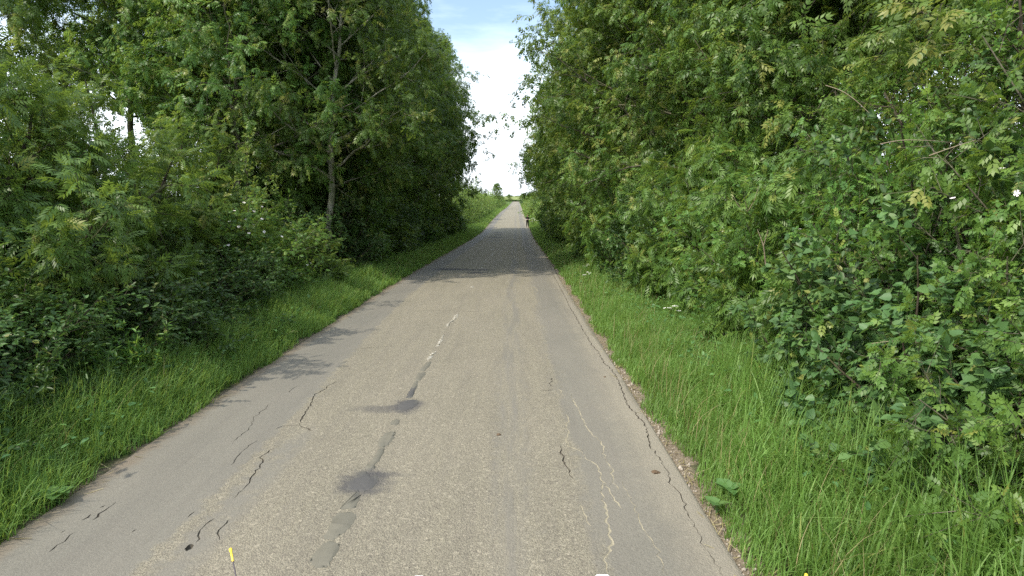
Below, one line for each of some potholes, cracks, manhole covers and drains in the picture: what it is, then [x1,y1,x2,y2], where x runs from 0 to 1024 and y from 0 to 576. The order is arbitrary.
crack [51,502,116,551]
crack [188,512,228,541]
crack [233,382,335,495]
crack [550,265,721,572]
